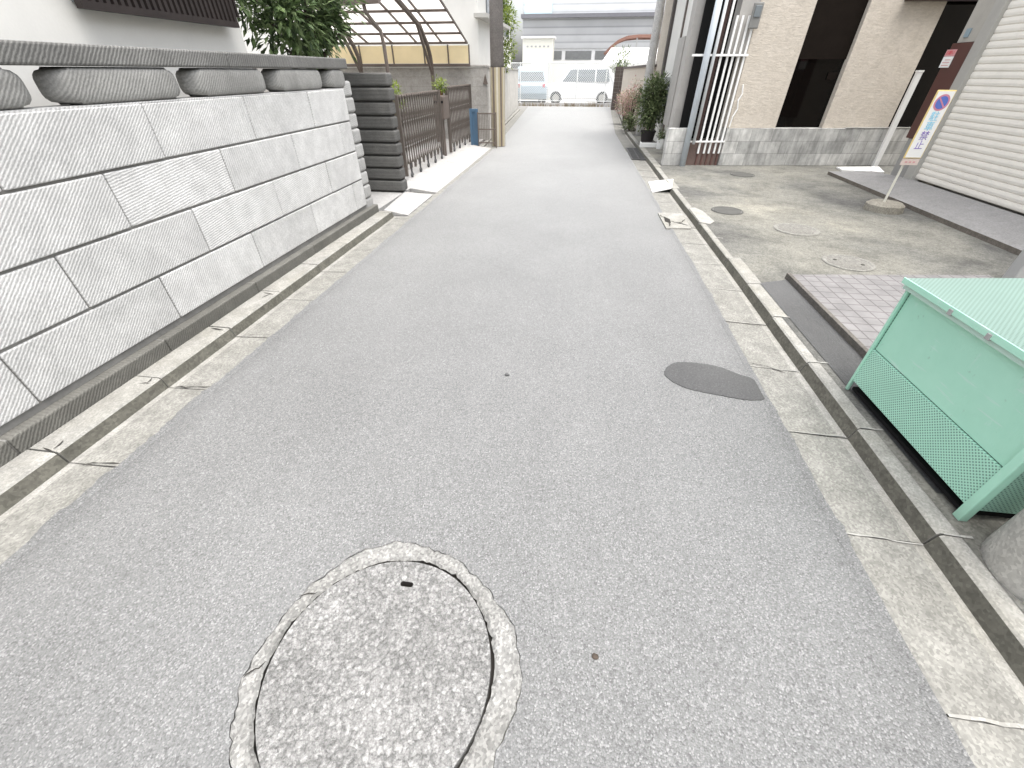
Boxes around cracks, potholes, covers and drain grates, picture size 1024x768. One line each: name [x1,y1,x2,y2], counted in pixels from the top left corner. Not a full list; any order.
manhole cover [822,254,876,271]
manhole cover [229,541,522,768]
manhole cover [711,206,744,215]
drain grate [625,148,646,160]
manhole cover [773,223,820,236]
